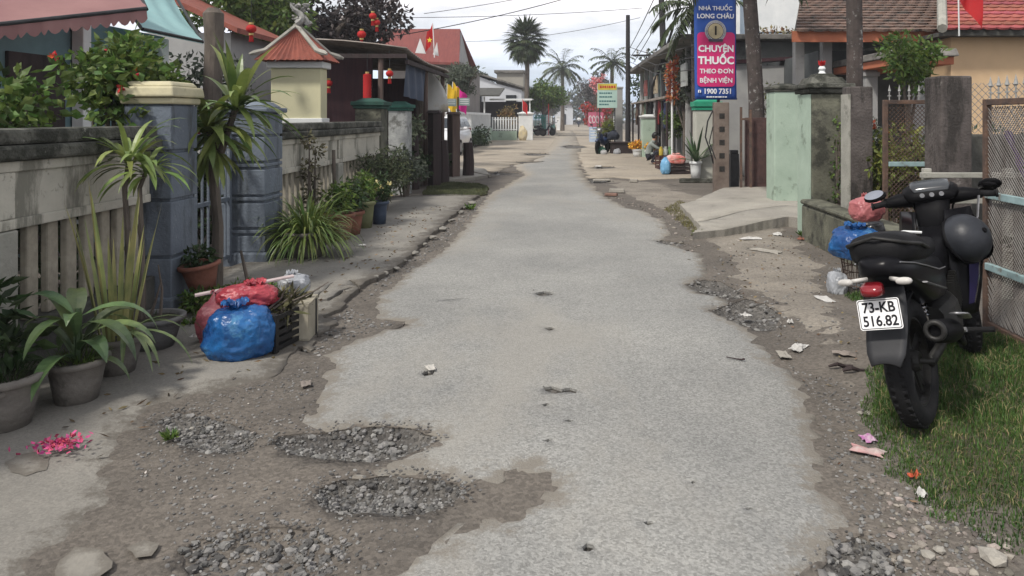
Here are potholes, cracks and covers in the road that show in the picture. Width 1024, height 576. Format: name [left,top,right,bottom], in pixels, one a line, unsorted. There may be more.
pothole [688,277,743,298]
pothole [148,402,268,454]
pothole [711,295,787,331]
pothole [162,517,359,576]
pothole [268,420,448,463]
pothole [298,464,482,517]
pothole [793,521,904,576]
